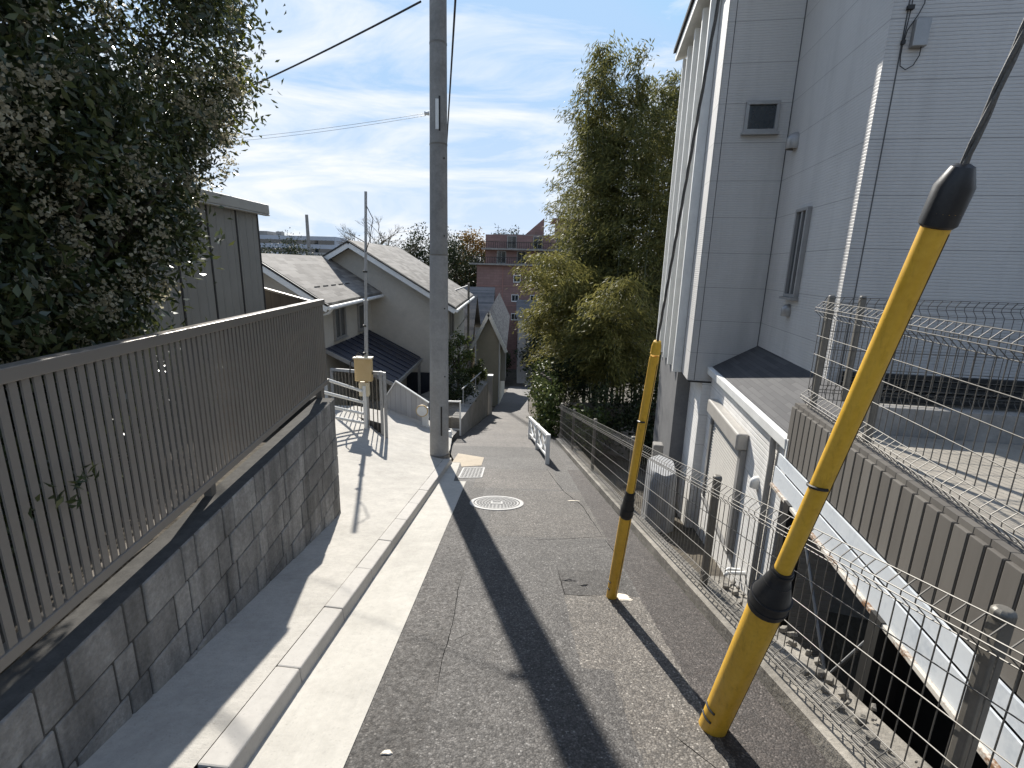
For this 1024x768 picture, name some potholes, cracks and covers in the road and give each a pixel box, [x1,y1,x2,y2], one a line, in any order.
manhole cover [470,496,524,511]
